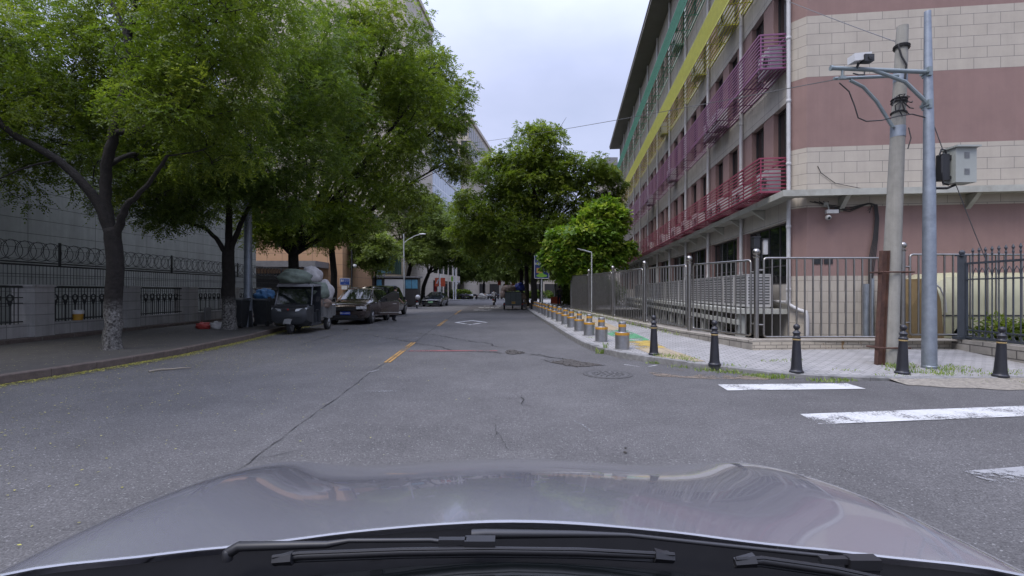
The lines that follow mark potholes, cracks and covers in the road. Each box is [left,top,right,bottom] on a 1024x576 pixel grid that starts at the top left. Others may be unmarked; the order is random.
manhole cover [583,370,633,379]
